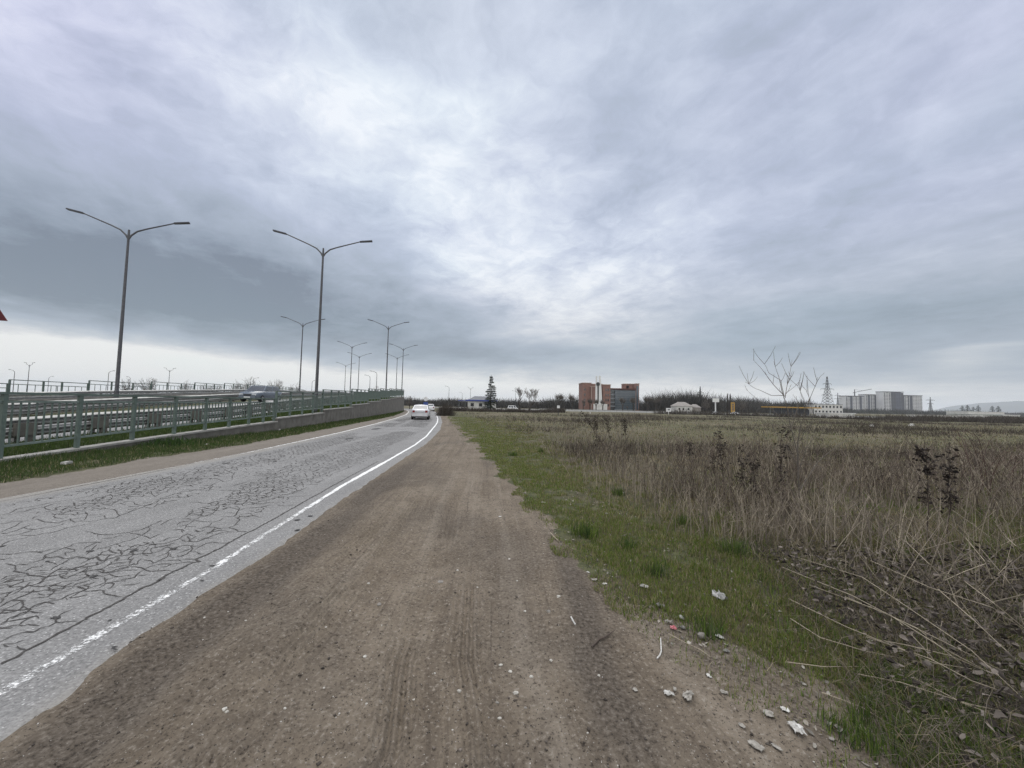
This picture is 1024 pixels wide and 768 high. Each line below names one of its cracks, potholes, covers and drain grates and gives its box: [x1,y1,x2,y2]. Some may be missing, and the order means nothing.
crack [0,434,378,663]
